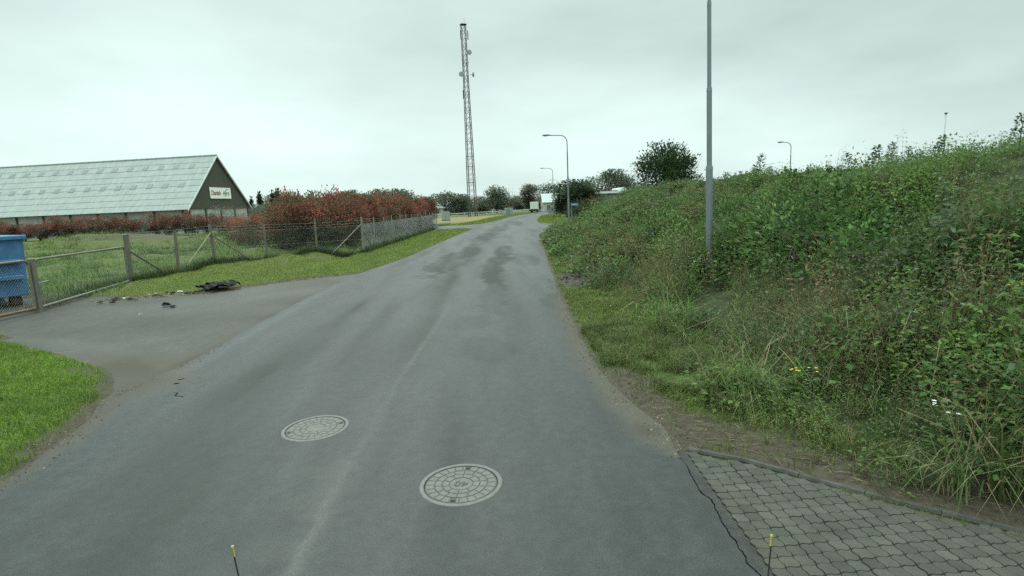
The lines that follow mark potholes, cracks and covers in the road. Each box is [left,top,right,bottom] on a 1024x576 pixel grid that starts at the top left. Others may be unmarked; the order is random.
manhole cover [419,464,502,507]
manhole cover [281,415,349,442]
